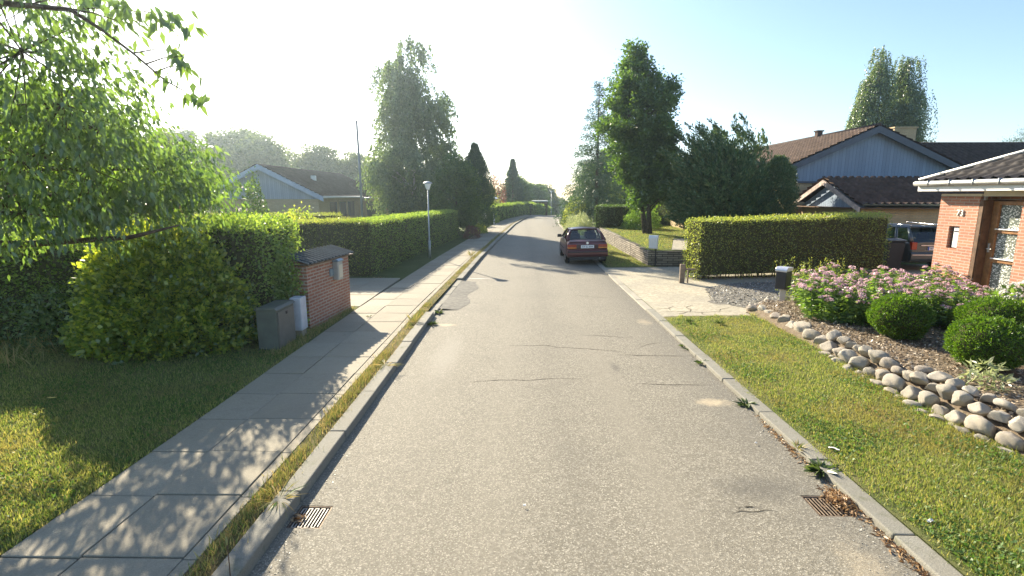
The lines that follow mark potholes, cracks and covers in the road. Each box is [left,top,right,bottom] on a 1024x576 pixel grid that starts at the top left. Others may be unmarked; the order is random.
crack [507,335,656,356]
drain grate [286,506,333,528]
drain grate [801,496,856,517]
